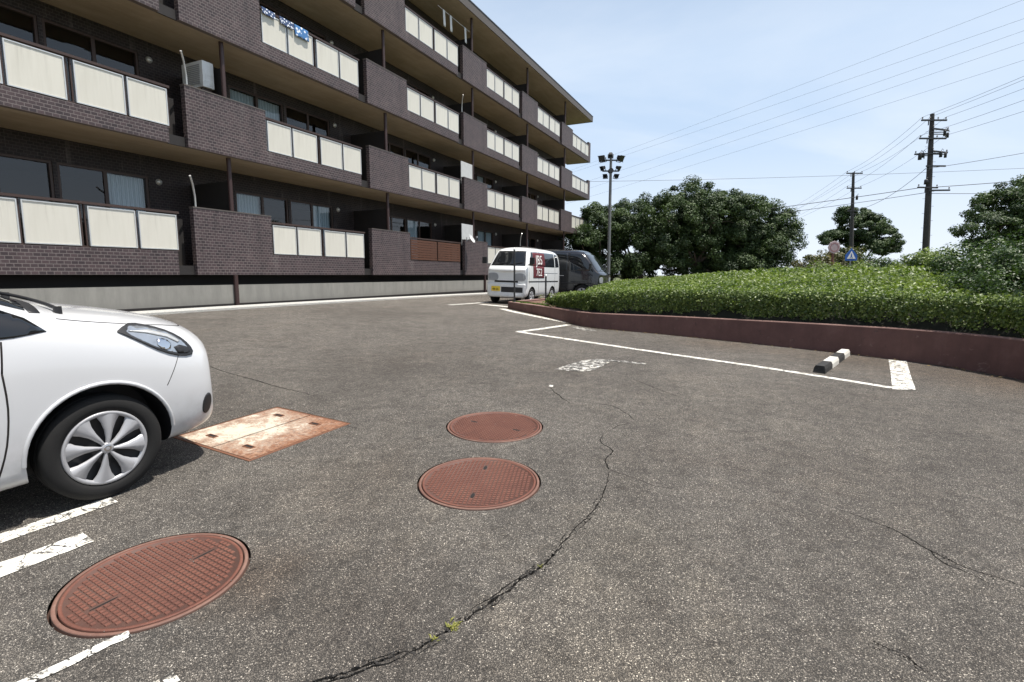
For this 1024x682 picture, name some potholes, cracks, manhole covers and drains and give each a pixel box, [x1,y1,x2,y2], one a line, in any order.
crack [868,641,933,676]
manhole cover [417,457,541,511]
crack [819,501,1023,587]
manhole cover [47,533,251,639]
manhole cover [446,412,543,443]
utility cover [172,407,351,462]
crack [303,388,678,682]
